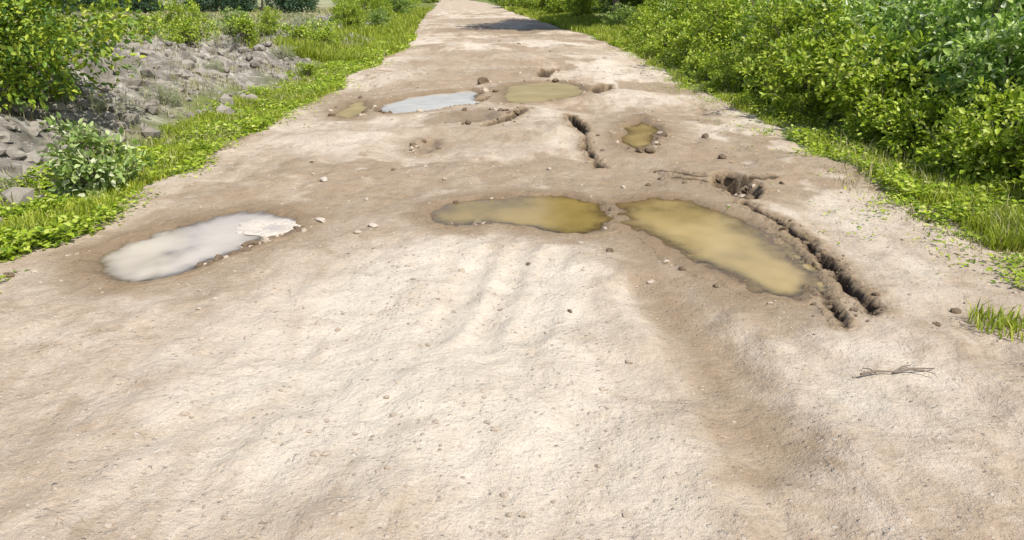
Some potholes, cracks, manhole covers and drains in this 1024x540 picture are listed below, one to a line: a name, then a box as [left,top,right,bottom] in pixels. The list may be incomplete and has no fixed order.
pothole [608,111,677,154]
pothole [489,78,592,105]
pothole [67,203,318,289]
pothole [369,87,490,115]
pothole [435,107,512,125]
pothole [602,192,841,306]
pothole [412,190,631,237]
pothole [327,96,379,120]
crack [562,113,615,170]
pothole [703,169,773,201]
